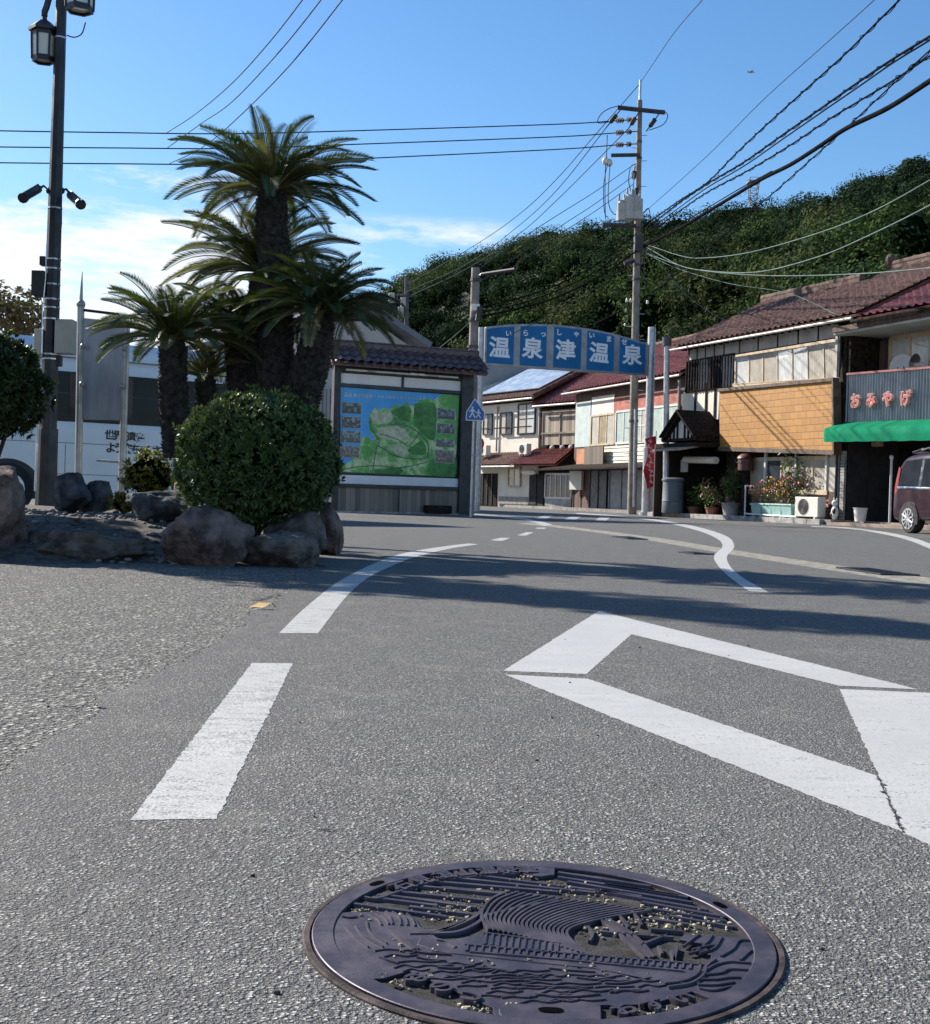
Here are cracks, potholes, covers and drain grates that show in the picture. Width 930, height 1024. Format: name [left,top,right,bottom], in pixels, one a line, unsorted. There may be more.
manhole cover [302,860,787,1024]
crack [875,777,905,830]
